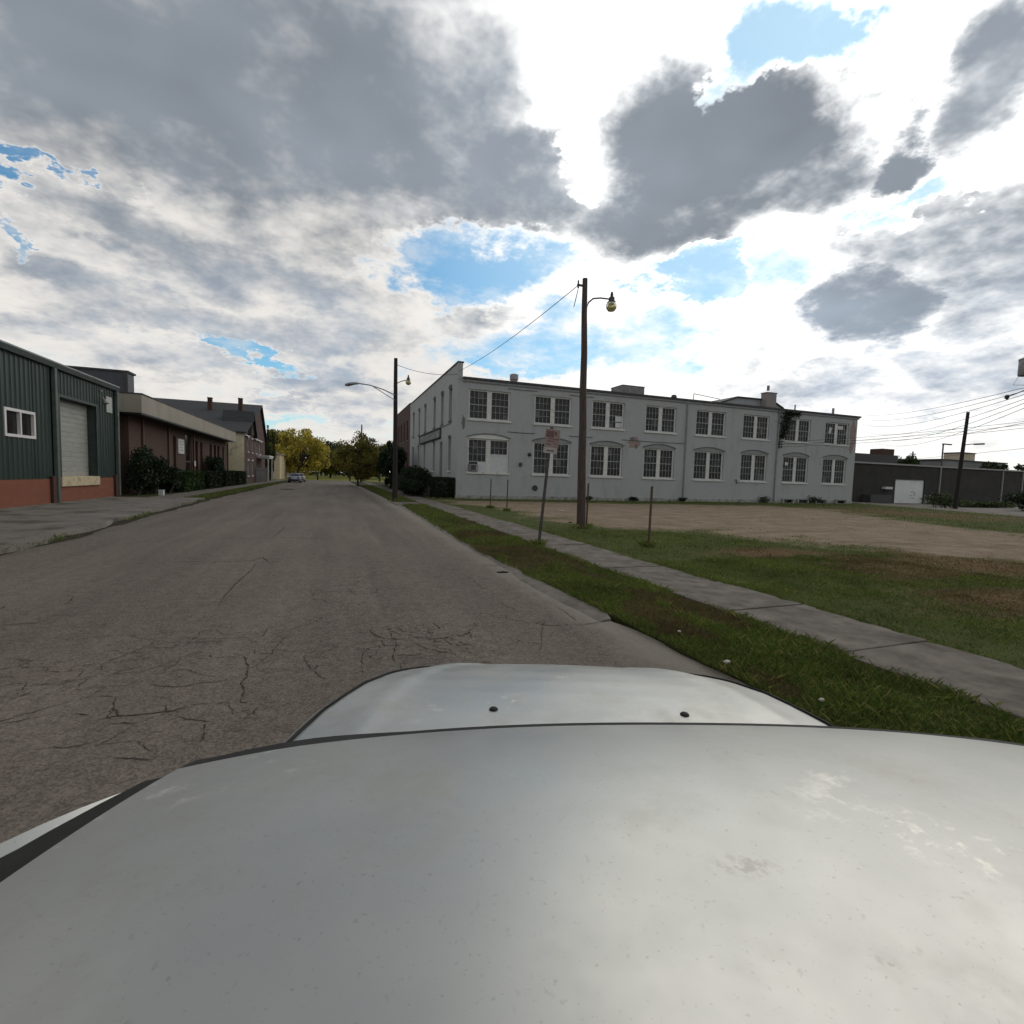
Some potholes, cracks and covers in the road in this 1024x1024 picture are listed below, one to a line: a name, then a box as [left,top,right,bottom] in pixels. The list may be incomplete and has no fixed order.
crack [356,602,603,673]
crack [0,617,342,760]
